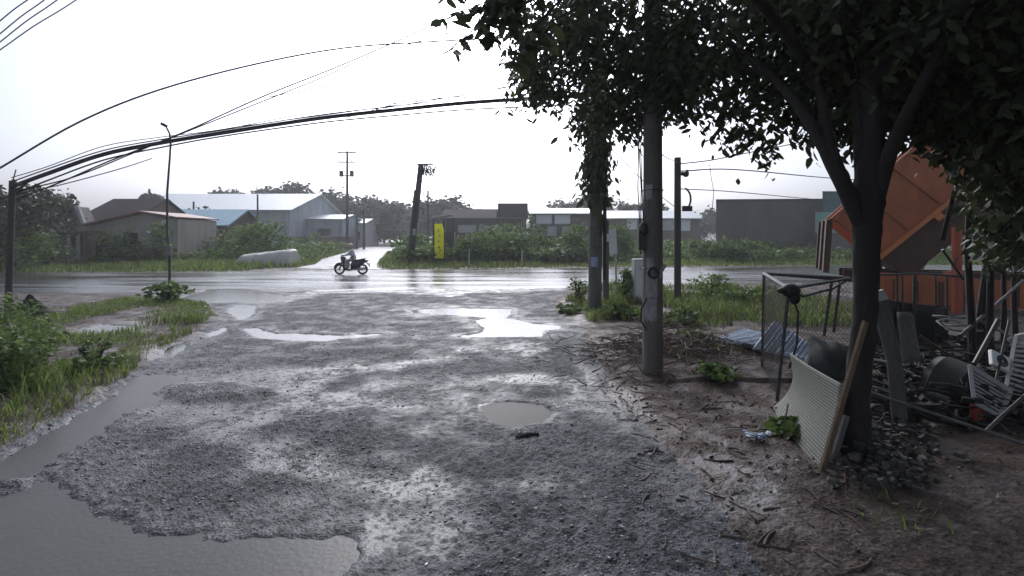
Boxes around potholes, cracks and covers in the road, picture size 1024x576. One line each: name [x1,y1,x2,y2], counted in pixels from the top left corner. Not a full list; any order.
pothole [0,370,387,576]
pothole [237,326,386,341]
pothole [220,304,264,320]
pothole [478,398,562,429]
pothole [403,307,569,338]
